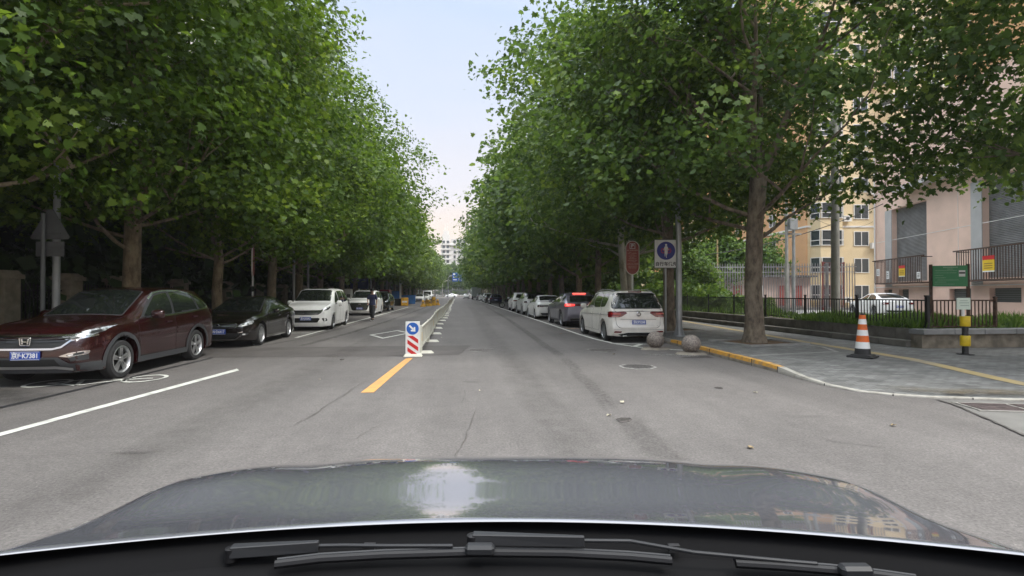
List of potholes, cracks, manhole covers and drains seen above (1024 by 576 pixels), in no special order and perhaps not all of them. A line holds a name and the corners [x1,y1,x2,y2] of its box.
drain grate [951,402,1024,413]
